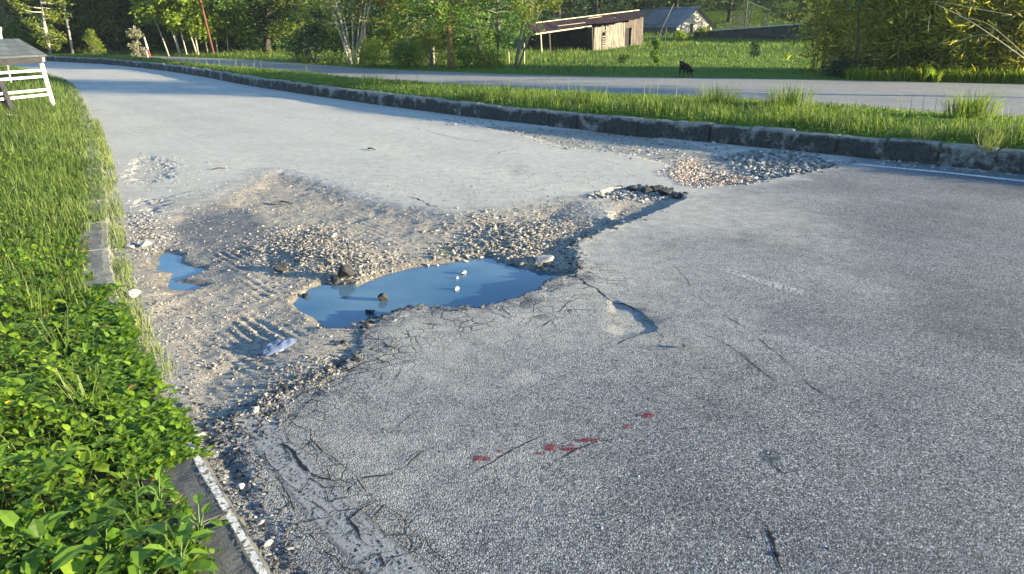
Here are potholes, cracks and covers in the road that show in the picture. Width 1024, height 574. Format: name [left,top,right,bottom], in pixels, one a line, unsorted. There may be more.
crack [216,309,512,574]
pothole [118,155,185,185]
pothole [578,185,688,225]
crack [766,526,784,573]
crack [532,278,637,327]
pothole [594,299,659,344]
pothole [109,167,627,423]
crack [467,436,542,477]
